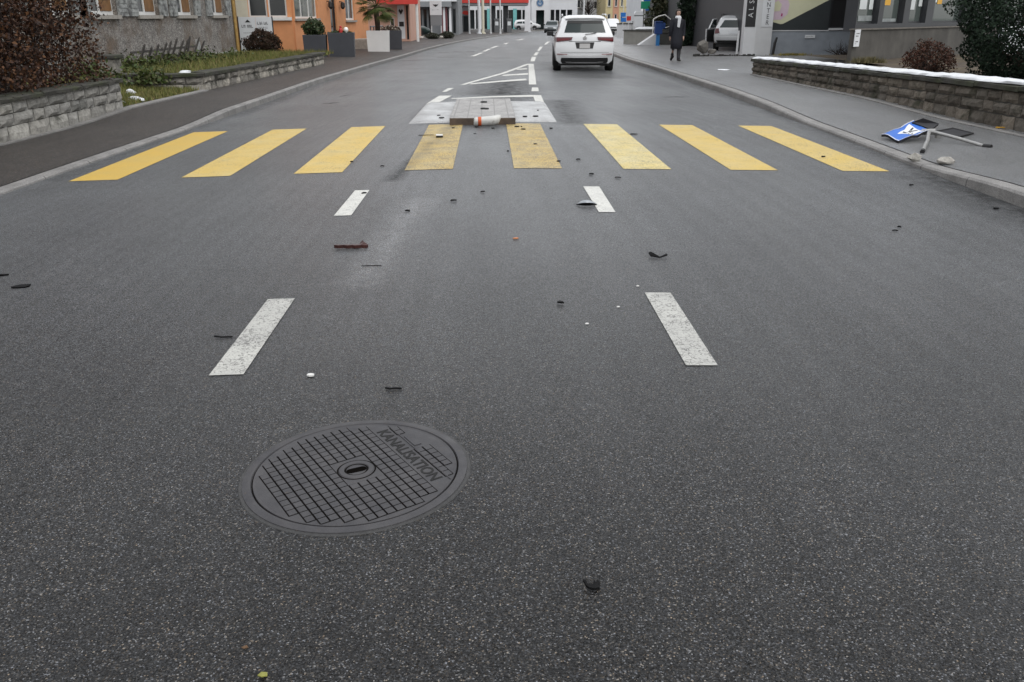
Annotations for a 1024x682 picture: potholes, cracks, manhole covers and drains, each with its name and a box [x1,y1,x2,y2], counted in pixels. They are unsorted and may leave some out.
manhole cover [238,420,471,537]
